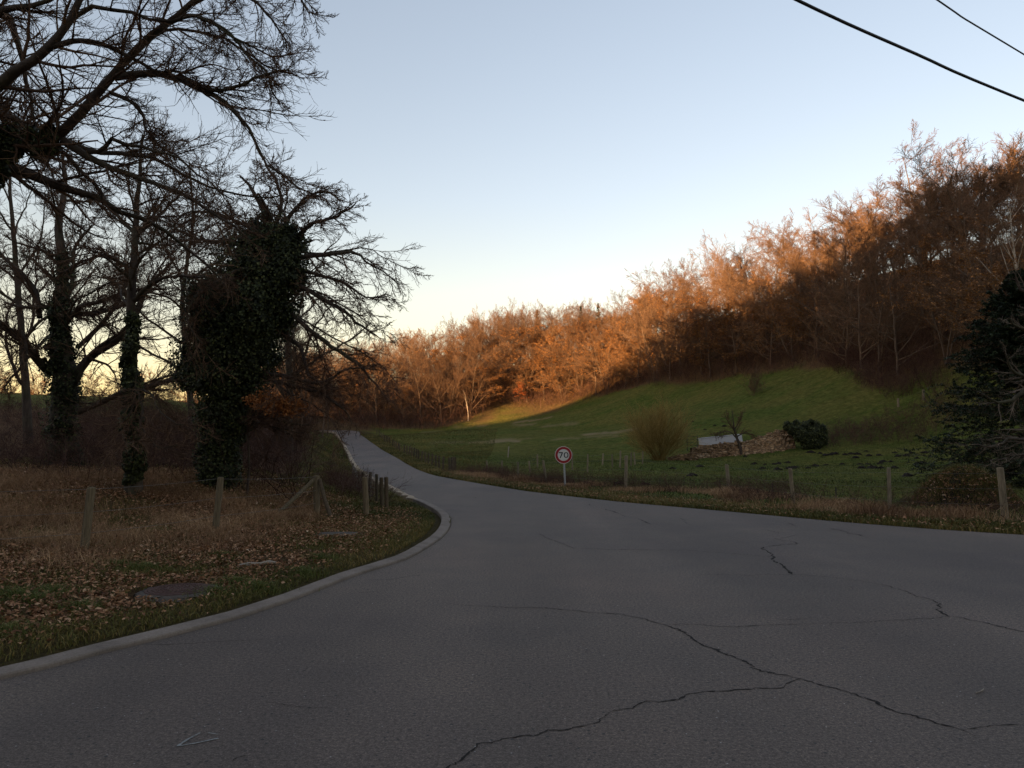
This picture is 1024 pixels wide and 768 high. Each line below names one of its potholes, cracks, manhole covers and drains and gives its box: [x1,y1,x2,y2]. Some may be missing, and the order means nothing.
crack [446,533,1024,768]
manhole cover [133,583,223,602]
